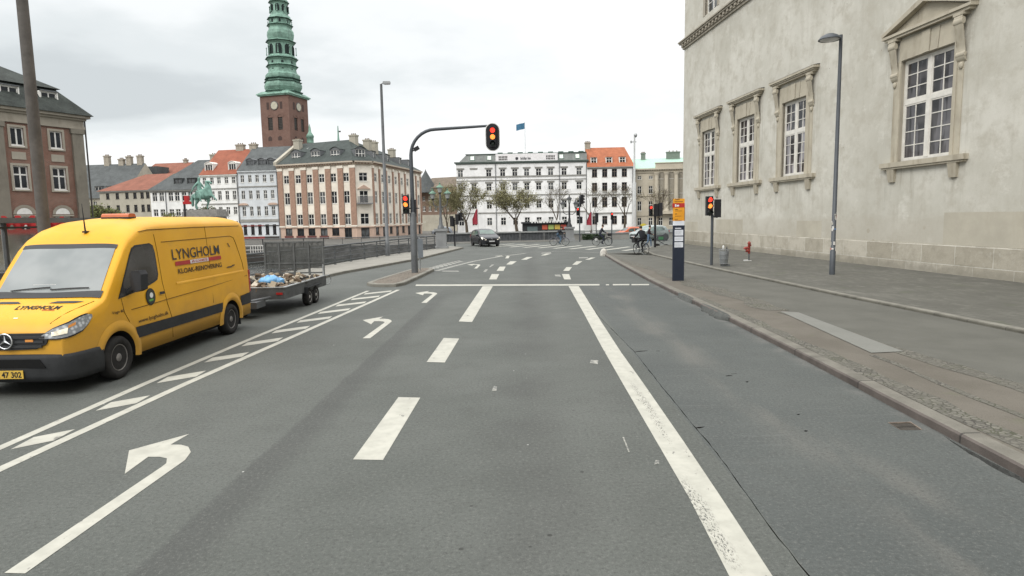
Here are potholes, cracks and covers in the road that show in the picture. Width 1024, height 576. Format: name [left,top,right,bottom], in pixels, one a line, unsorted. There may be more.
drain grate [888,422,923,430]
